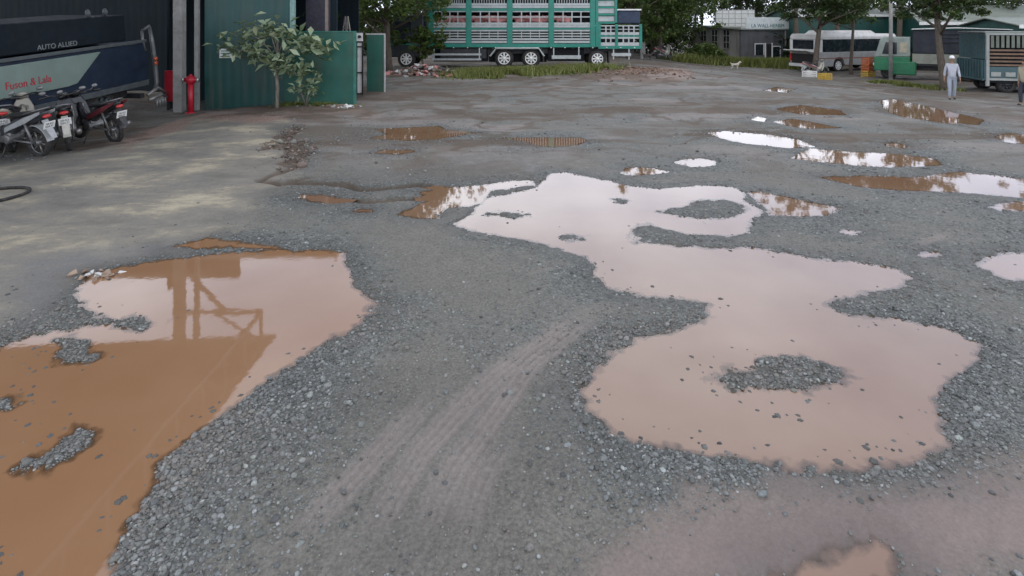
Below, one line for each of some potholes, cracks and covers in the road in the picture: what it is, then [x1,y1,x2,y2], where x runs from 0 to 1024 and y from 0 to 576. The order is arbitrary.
pothole [360,124,483,141]
pothole [875,98,989,126]
pothole [769,117,849,130]
pothole [155,232,291,253]
pothole [613,164,676,177]
pothole [445,169,1002,489]
pothole [750,518,920,576]
pothole [387,177,540,221]
pothole [961,247,1024,284]
pothole [0,244,389,576]
